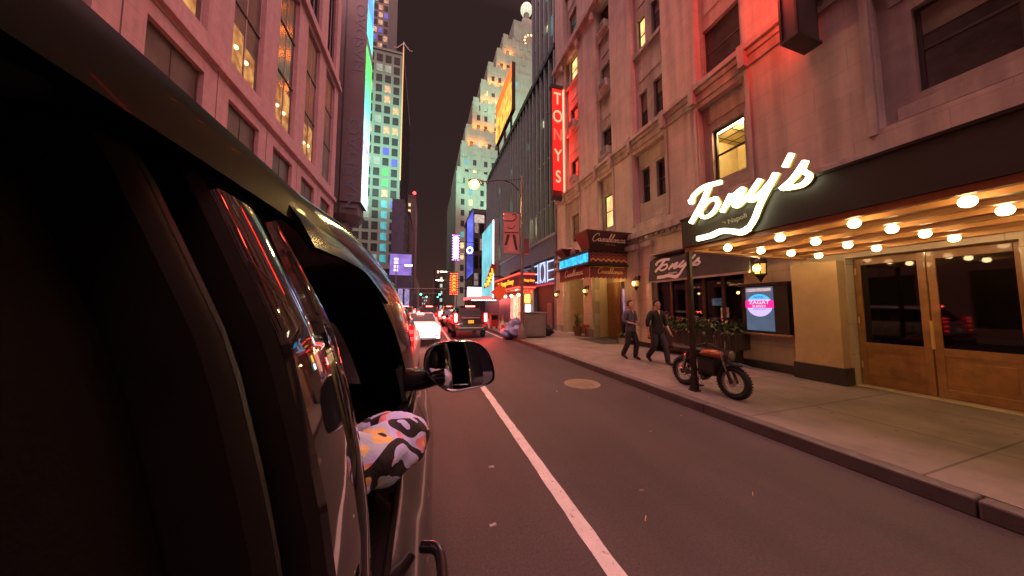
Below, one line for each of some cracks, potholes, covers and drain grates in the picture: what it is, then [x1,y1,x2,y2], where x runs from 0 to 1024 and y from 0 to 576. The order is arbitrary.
manhole cover [564,379,601,389]
